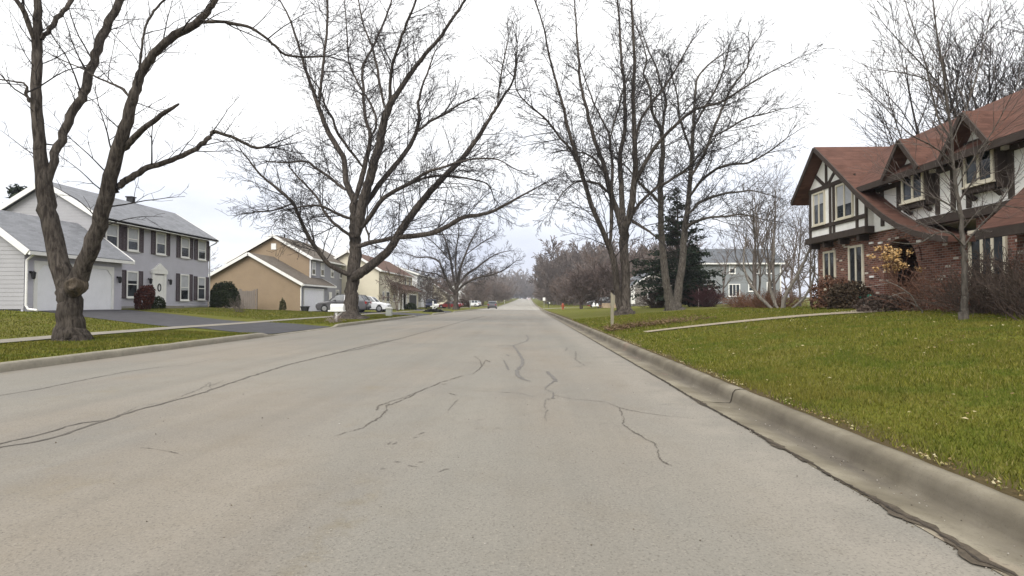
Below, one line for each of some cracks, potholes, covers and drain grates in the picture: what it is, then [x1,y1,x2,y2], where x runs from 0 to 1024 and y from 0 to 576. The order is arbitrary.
crack [0,316,483,447]
crack [335,318,1018,576]
